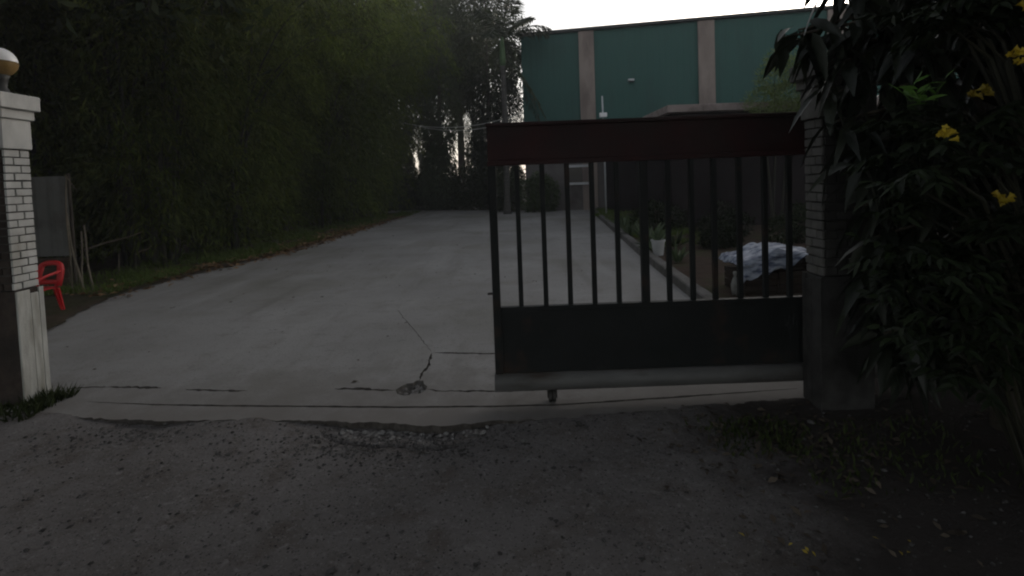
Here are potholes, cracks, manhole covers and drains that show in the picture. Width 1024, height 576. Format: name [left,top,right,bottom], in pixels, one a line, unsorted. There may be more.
pothole [396,380,427,396]
crack [338,311,495,392]
